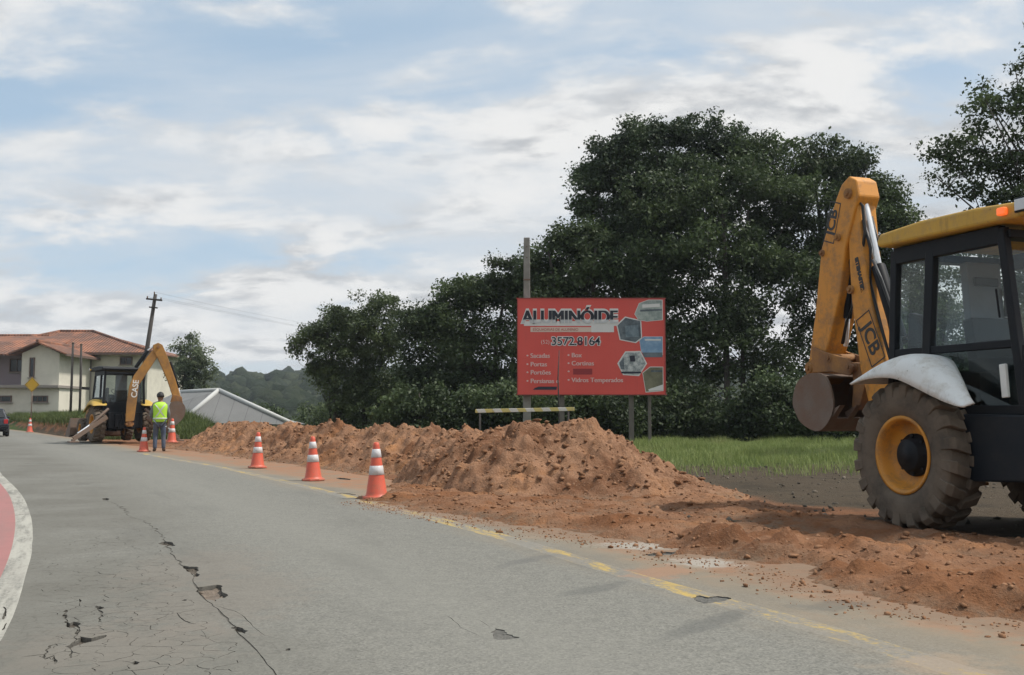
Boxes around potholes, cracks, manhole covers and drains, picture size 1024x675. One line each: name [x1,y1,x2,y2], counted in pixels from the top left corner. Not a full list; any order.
crack [23,505,278,675]
pothole [694,595,731,604]
pothole [197,585,228,601]
pothole [65,635,107,649]
pothole [491,628,519,640]
